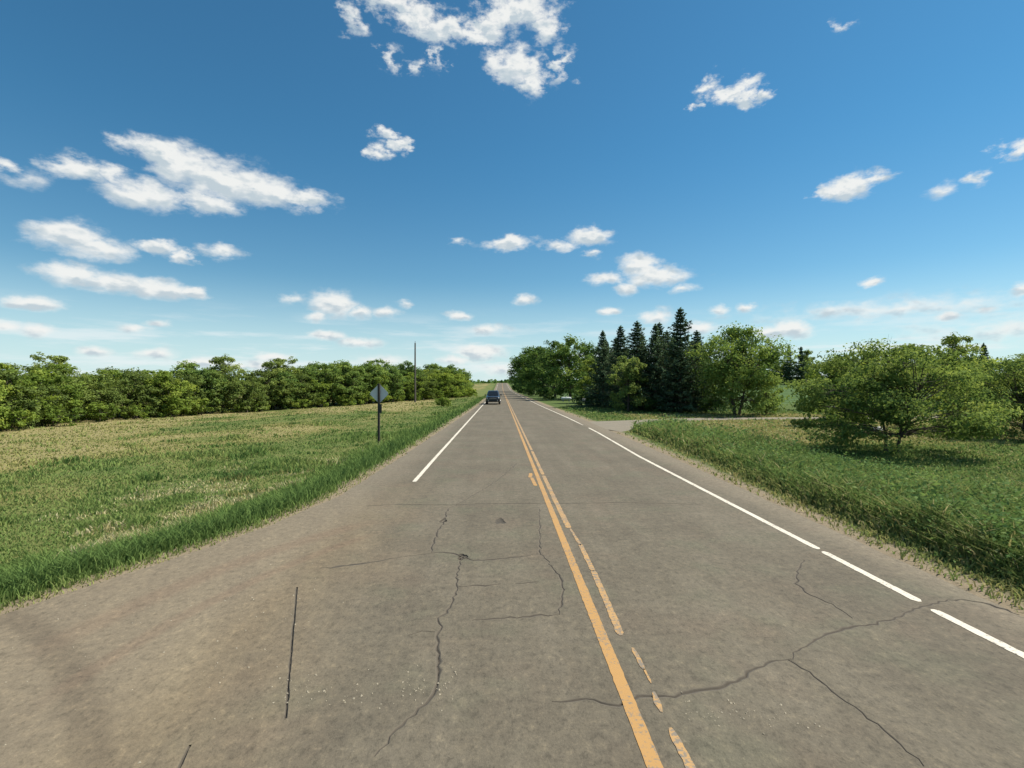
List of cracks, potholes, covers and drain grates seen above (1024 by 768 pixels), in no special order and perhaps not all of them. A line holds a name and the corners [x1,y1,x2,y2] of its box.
crack [323,463,684,757]
crack [552,560,1019,766]
